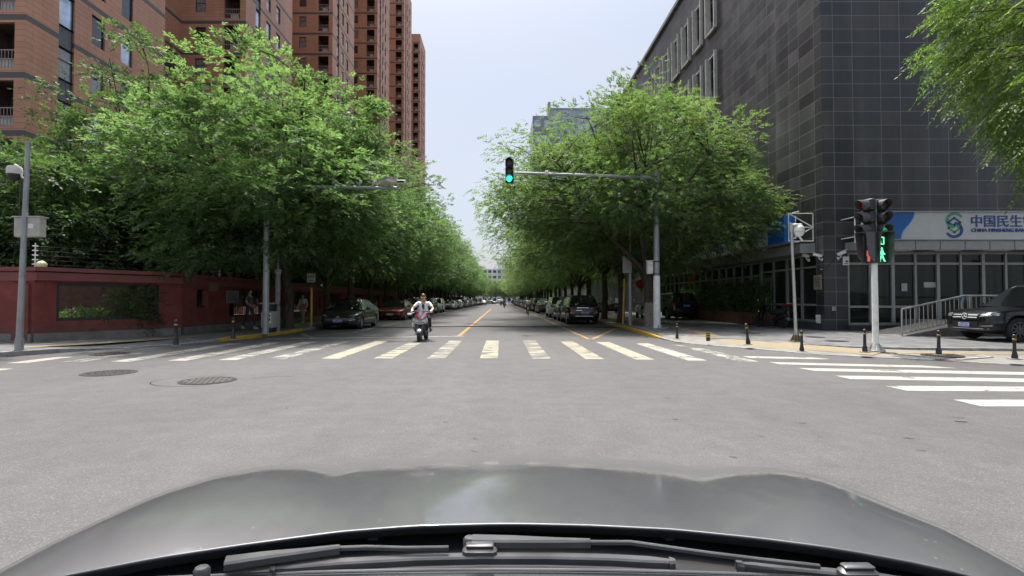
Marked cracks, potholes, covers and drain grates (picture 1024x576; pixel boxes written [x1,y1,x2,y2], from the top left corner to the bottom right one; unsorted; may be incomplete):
manhole cover [177,377,237,385]
